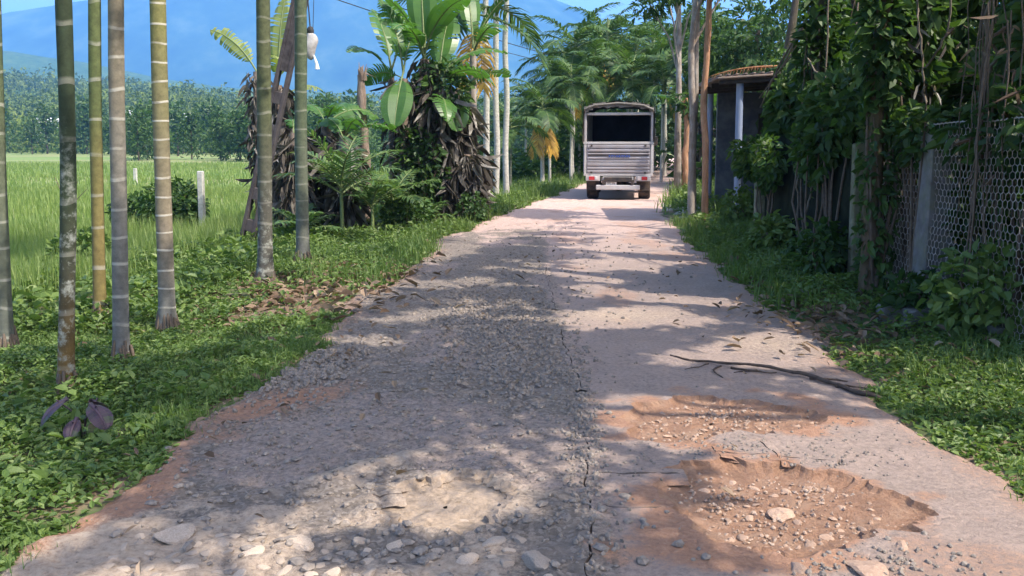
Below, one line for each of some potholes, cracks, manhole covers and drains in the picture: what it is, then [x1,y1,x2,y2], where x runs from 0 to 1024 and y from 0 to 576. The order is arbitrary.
crack [540,263,591,391]
pothole [639,454,956,568]
pothole [609,392,840,448]
